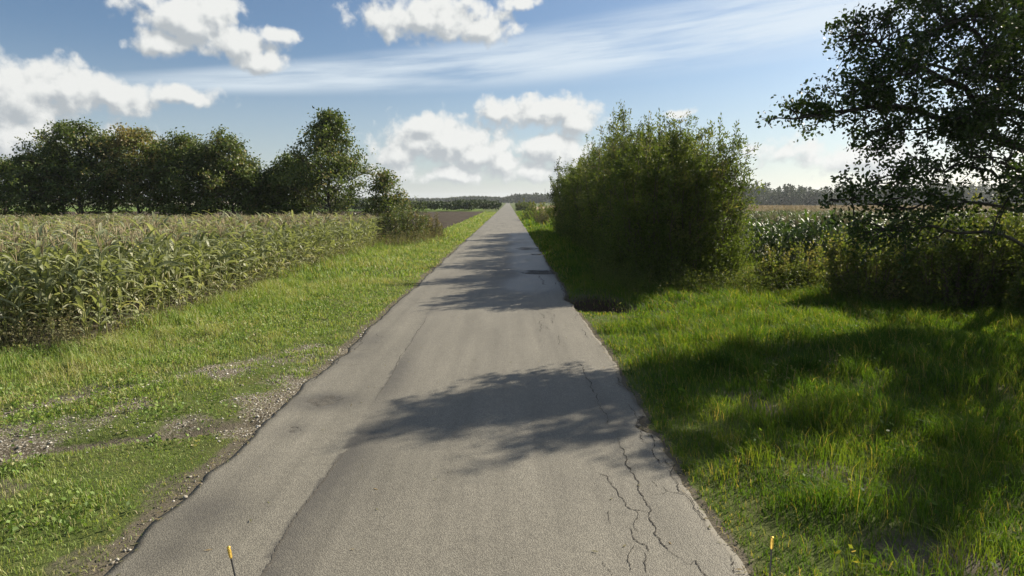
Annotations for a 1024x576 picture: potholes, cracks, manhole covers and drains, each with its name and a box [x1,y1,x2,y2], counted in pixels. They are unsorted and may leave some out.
crack [580,364,706,575]
